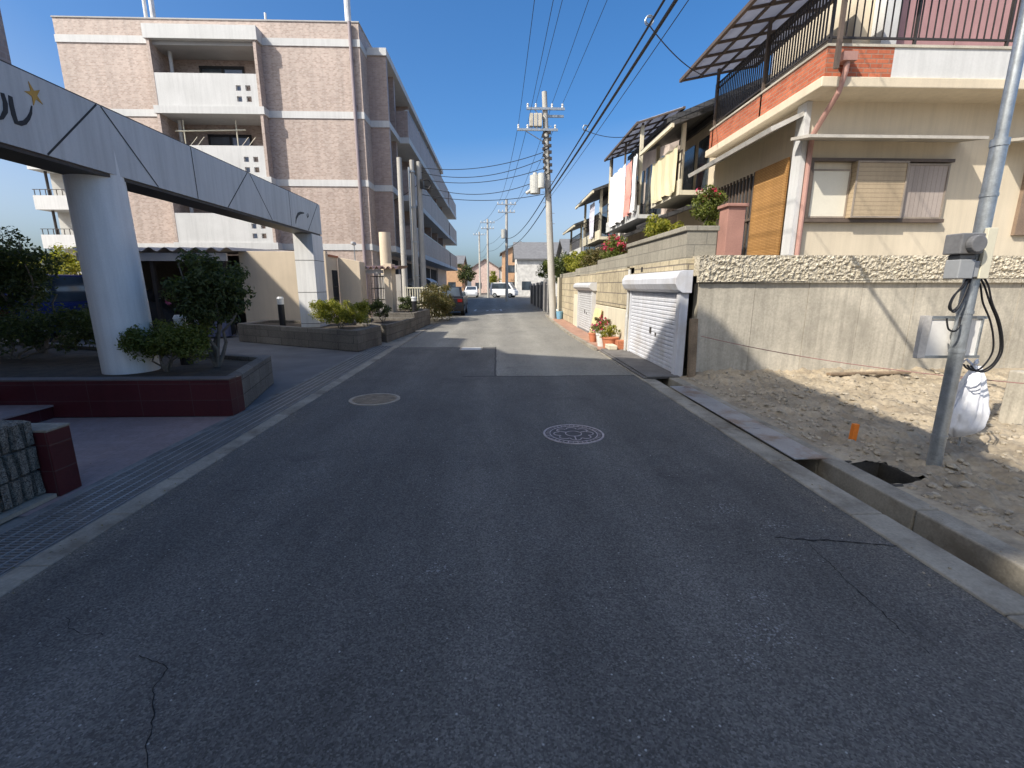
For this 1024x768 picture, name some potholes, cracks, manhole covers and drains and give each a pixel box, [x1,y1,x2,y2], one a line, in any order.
crack [139,655,168,768]
manhole cover [543,424,604,444]
manhole cover [349,393,400,406]
crack [775,537,930,654]
